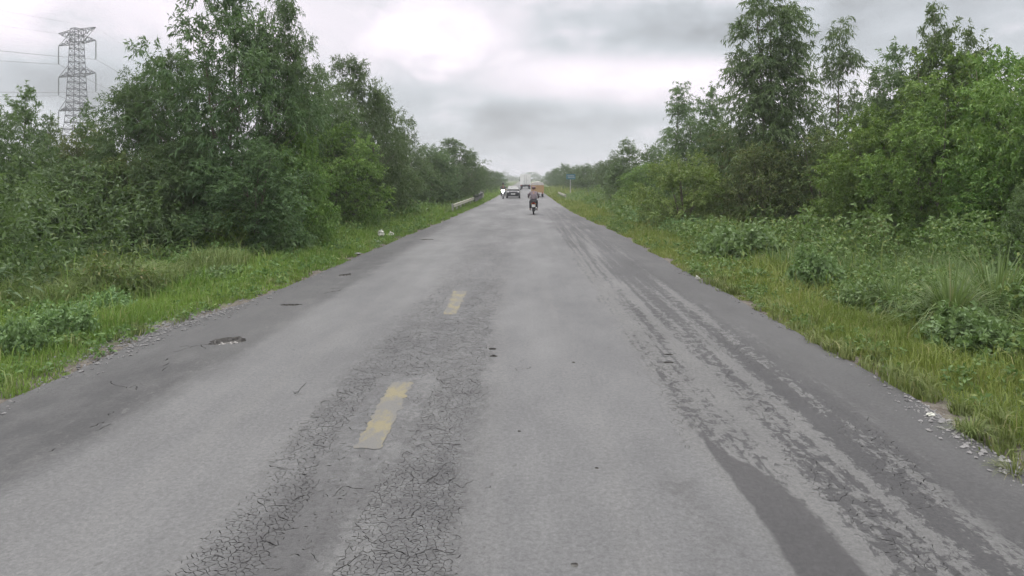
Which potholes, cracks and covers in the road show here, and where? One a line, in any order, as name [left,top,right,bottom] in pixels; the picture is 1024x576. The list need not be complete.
crack [167,233,509,576]
pothole [208,336,246,345]
